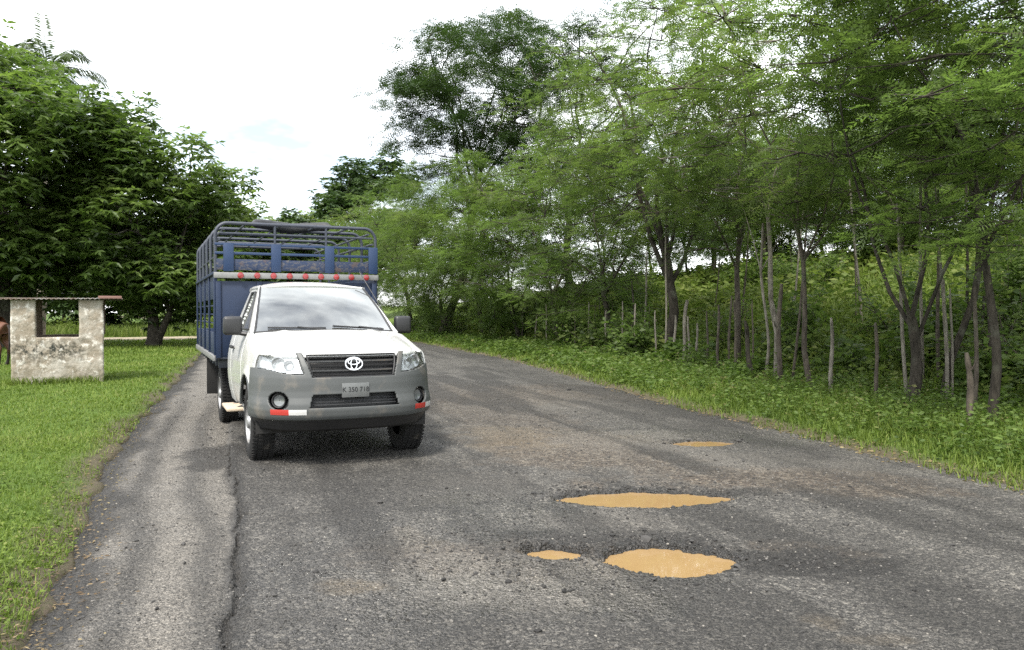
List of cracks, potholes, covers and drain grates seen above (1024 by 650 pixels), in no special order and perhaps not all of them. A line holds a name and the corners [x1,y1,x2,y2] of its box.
pothole [597,541,744,578]
pothole [545,488,739,509]
pothole [517,543,590,560]
crack [219,446,260,650]
